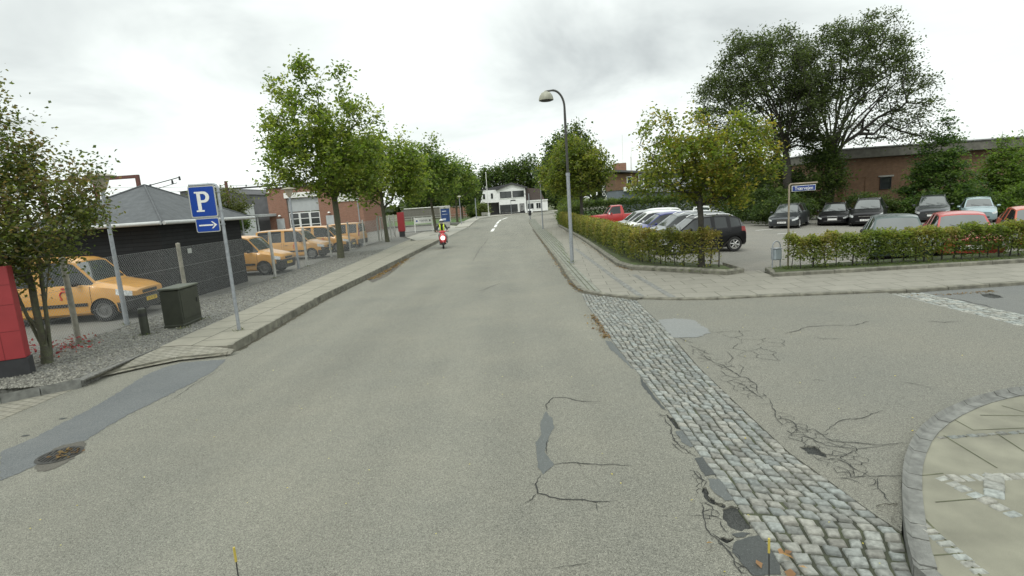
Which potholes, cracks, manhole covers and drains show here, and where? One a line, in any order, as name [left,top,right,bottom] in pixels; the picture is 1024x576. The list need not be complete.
pothole [723,508,752,531]
crack [523,440,624,510]
crack [679,321,900,503]
pothole [801,447,826,457]
